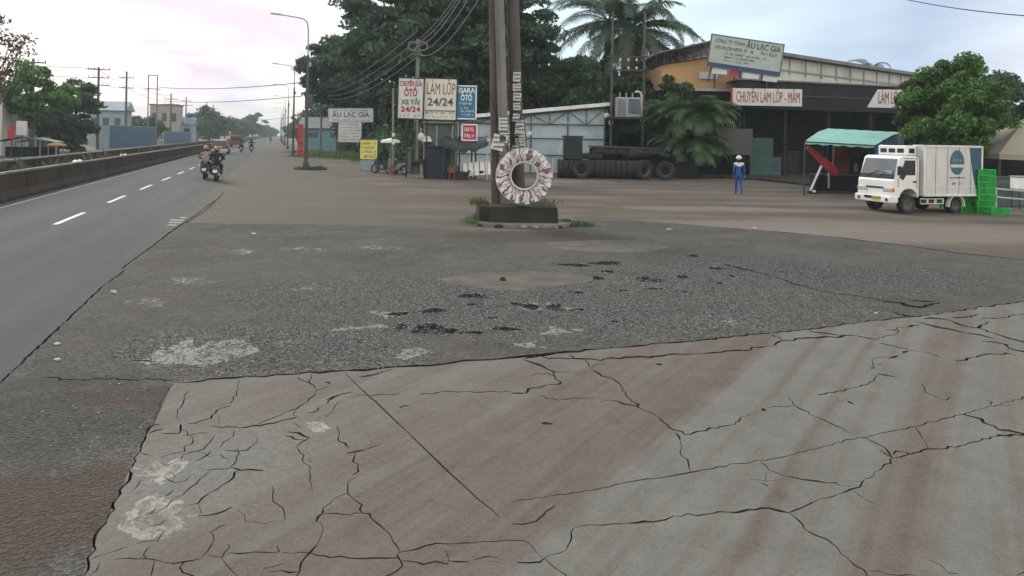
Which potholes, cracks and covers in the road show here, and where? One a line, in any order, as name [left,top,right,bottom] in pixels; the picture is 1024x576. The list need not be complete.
pothole [410,323,458,335]
crack [0,193,1024,576]
